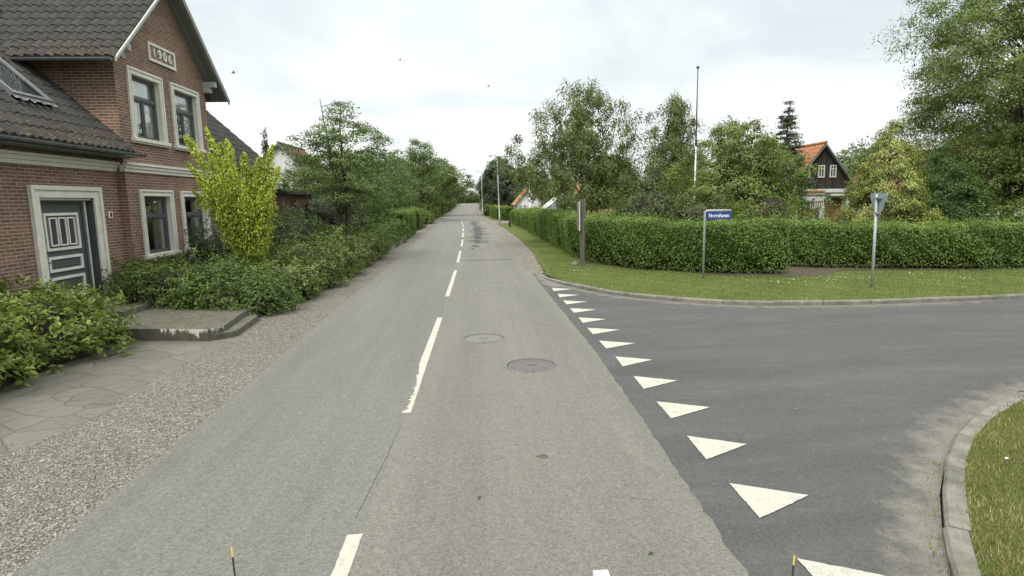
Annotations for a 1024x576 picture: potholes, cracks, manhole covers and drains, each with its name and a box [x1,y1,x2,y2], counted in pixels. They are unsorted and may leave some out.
manhole cover [504,358,558,373]
manhole cover [461,333,506,344]
